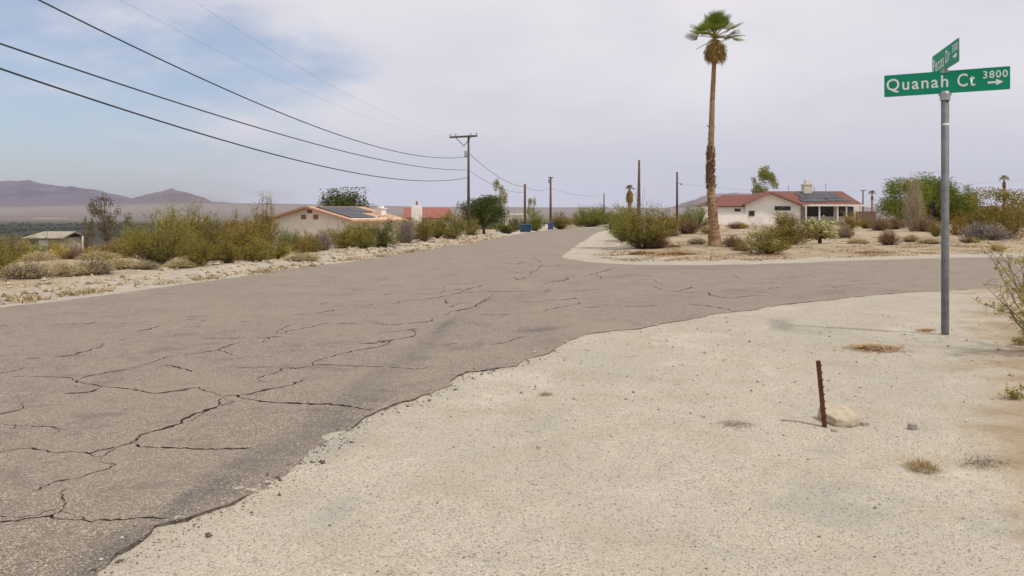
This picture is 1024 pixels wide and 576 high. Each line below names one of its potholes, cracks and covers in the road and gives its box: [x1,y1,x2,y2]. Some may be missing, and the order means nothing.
crack [0,260,873,523]
